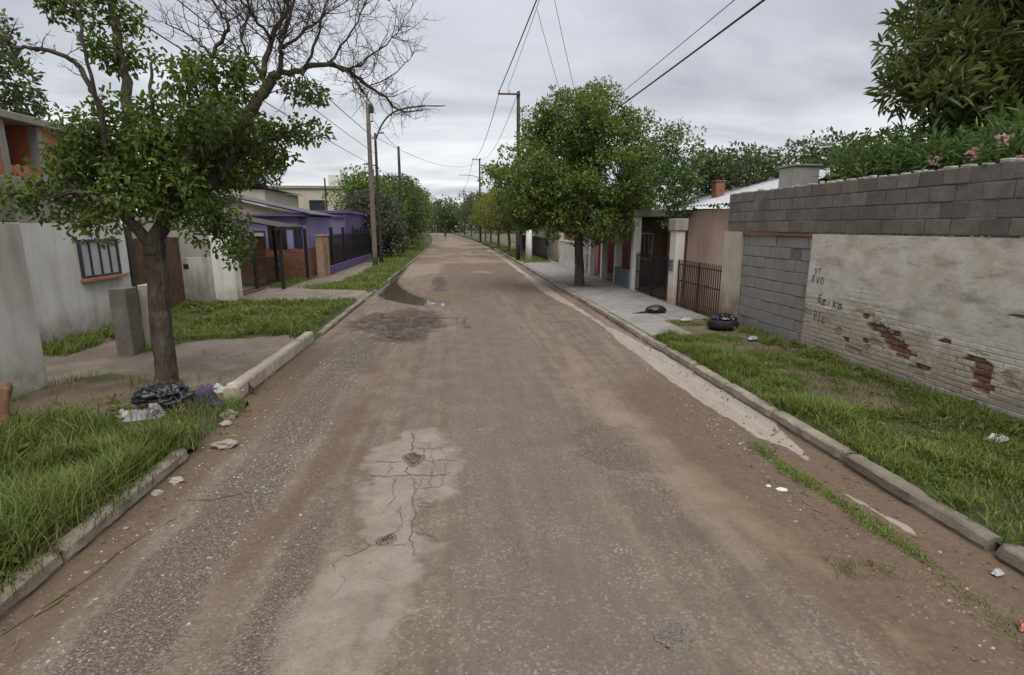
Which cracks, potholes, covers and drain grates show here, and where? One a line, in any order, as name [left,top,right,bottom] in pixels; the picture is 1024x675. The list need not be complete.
crack [329,431,455,599]
pothole [402,452,426,467]
pothole [375,532,397,545]
